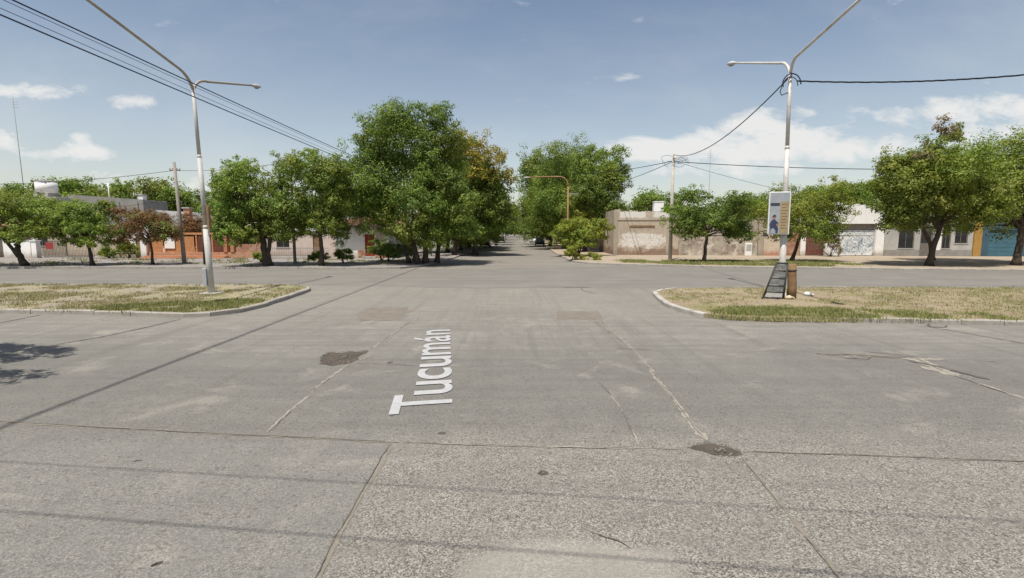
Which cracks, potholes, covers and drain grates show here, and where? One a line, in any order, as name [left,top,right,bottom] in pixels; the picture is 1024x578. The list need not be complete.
crack [816,324,1024,399]
crack [592,320,708,445]
